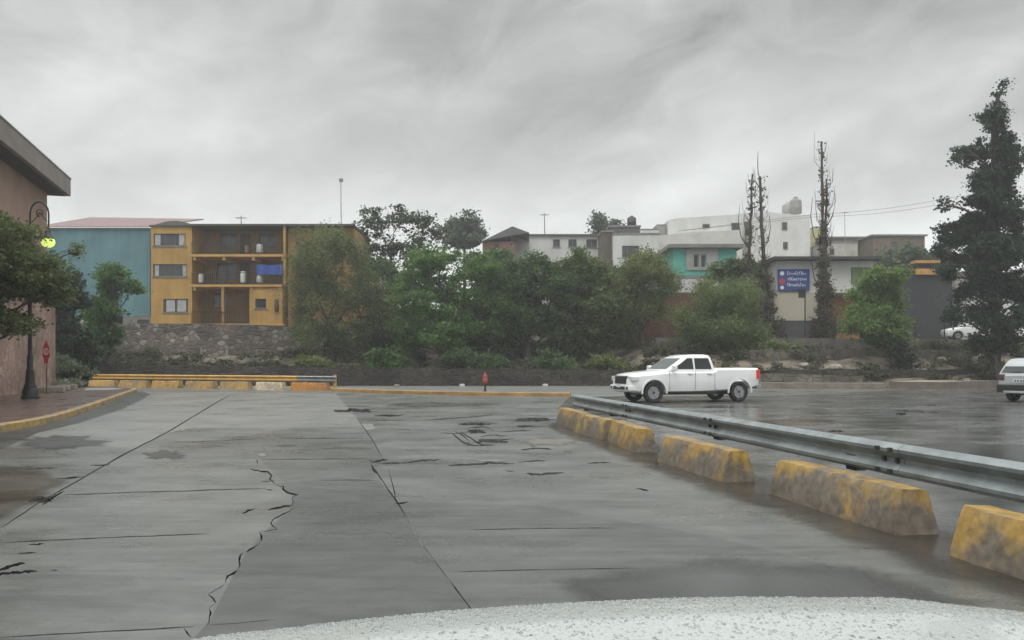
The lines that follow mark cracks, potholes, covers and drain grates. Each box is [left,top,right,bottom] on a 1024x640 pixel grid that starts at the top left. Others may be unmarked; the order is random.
crack [184,460,298,637]
crack [370,422,566,505]
